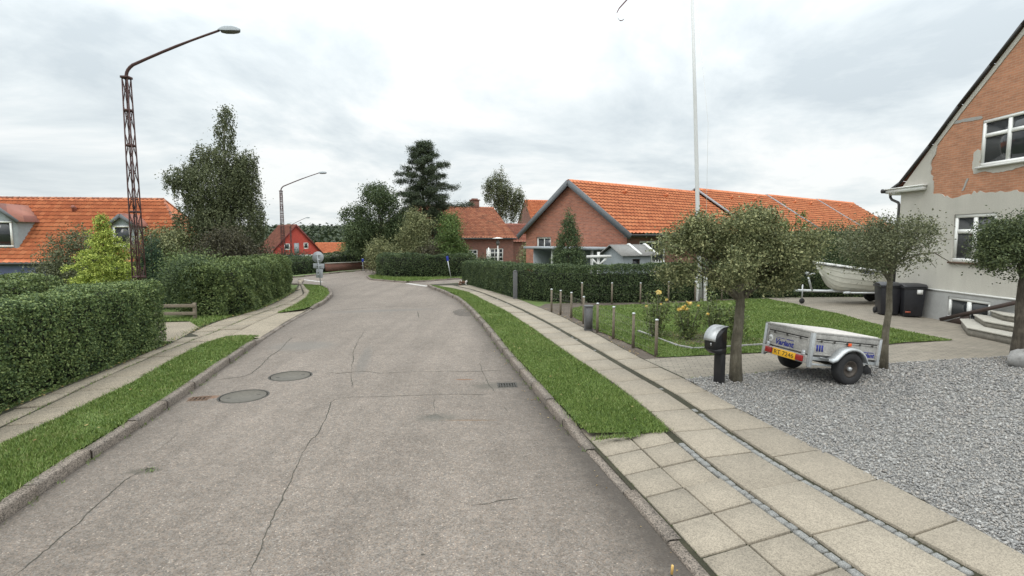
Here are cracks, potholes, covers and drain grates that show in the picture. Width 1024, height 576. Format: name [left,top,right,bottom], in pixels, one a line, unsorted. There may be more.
crack [13,436,175,576]
crack [250,330,507,572]
manhole cover [268,371,313,381]
manhole cover [217,389,270,403]
